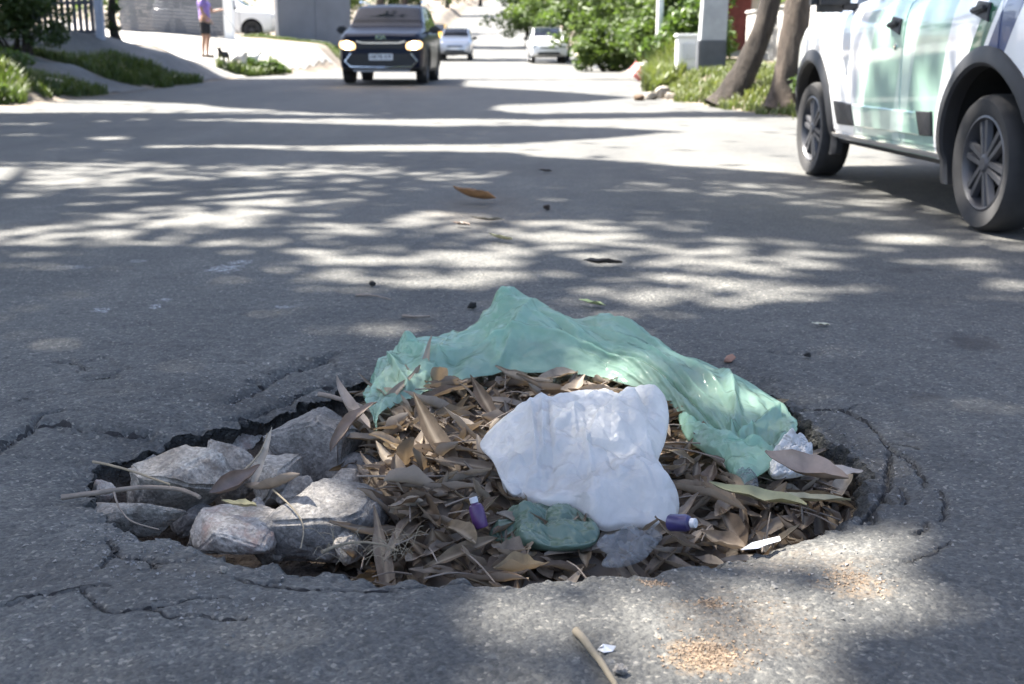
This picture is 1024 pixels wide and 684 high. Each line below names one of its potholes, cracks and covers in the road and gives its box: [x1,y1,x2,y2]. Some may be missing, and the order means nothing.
crack [104,543,181,570]
crack [4,584,248,622]
crack [233,364,334,421]
crack [0,398,148,450]
crack [801,405,951,563]
pothole [83,380,875,588]
